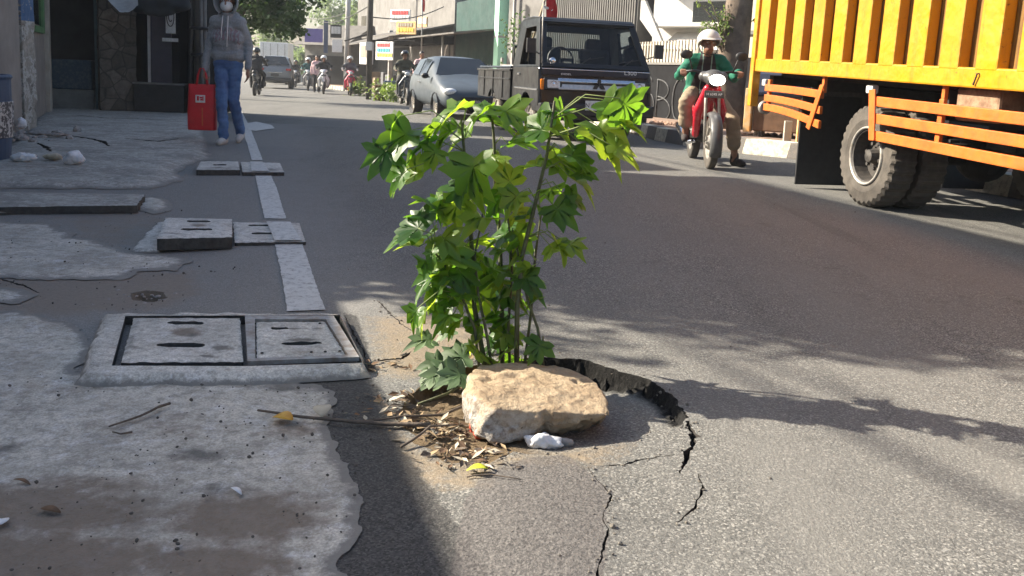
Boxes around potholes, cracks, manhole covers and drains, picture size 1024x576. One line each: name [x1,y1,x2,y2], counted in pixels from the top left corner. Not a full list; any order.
manhole cover [157,218,233,250]
pothole [131,290,168,302]
manhole cover [233,221,306,246]
manhole cover [241,161,284,176]
manhole cover [121,318,243,366]
pothole [398,357,689,465]
crack [378,301,412,331]
manhole cover [245,316,359,366]
manhole cover [196,161,240,176]
crack [608,421,705,522]
